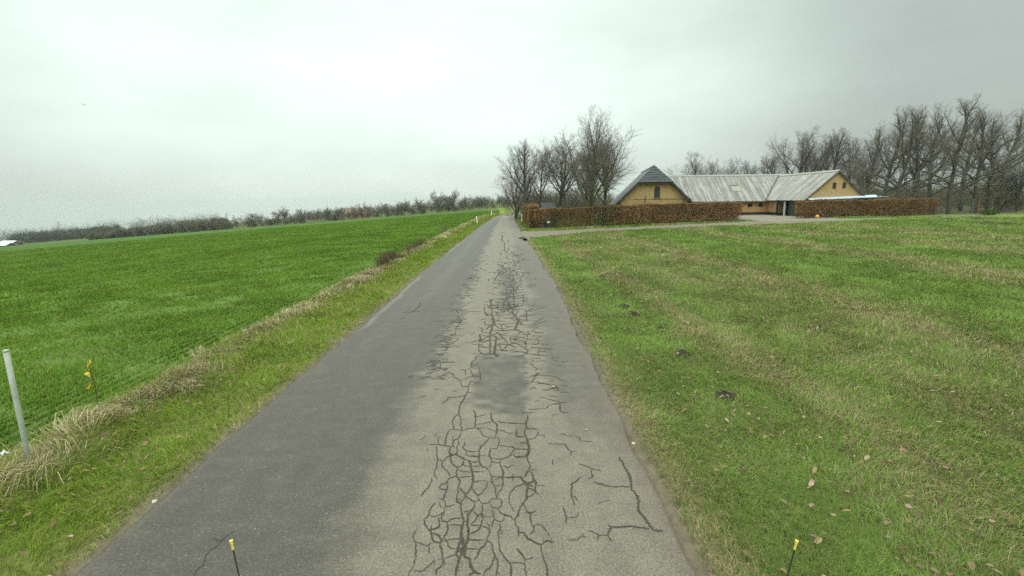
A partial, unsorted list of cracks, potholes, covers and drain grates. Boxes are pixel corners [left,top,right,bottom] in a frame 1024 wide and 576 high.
crack [408,232,663,576]
